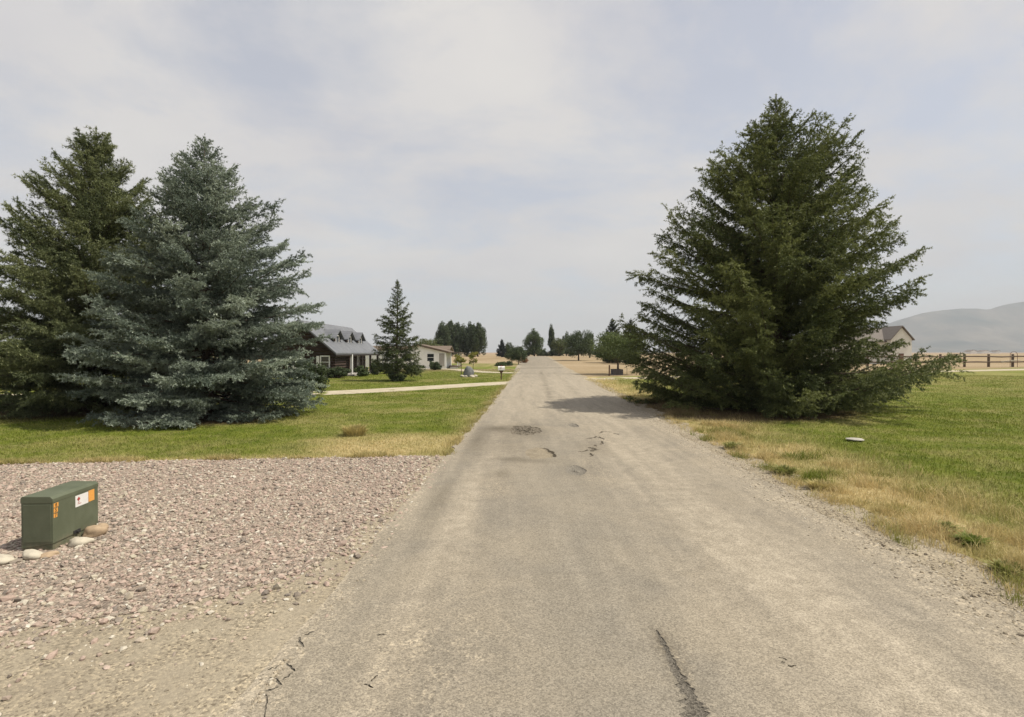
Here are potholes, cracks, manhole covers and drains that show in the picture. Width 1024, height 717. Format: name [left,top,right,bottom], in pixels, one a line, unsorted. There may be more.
crack [656,630,710,717]
pothole [509,426,542,435]
crack [264,631,314,717]
crack [579,431,615,457]
